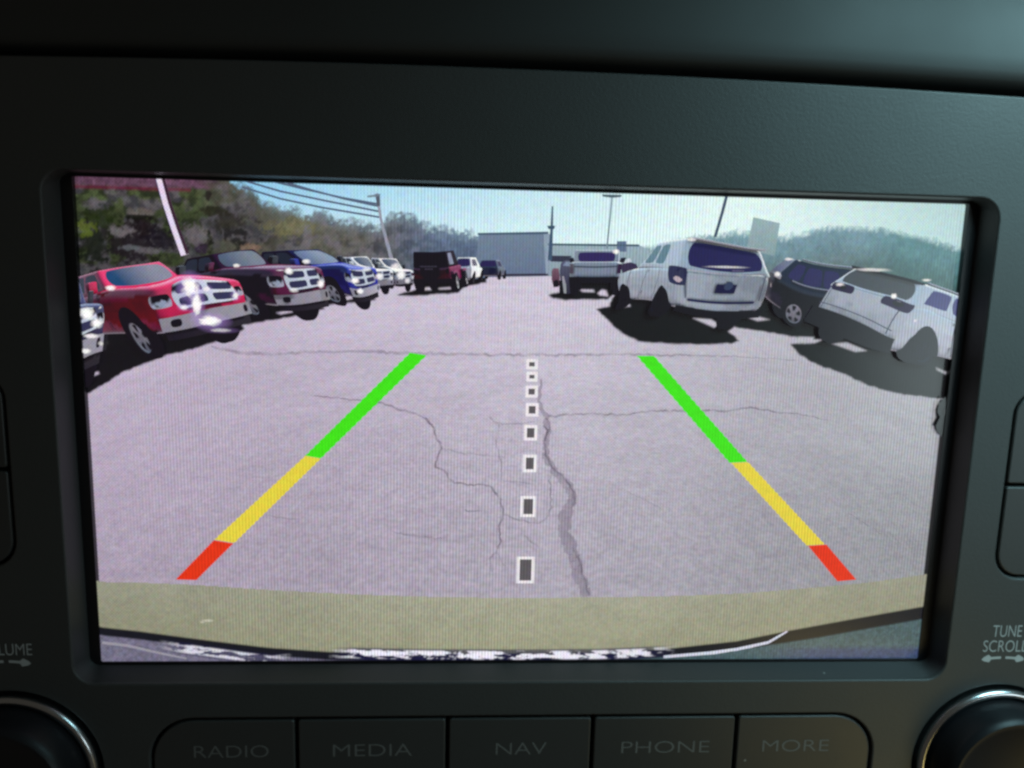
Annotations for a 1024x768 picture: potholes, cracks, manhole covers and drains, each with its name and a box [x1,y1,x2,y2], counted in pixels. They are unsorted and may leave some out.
crack [315,380,819,594]
